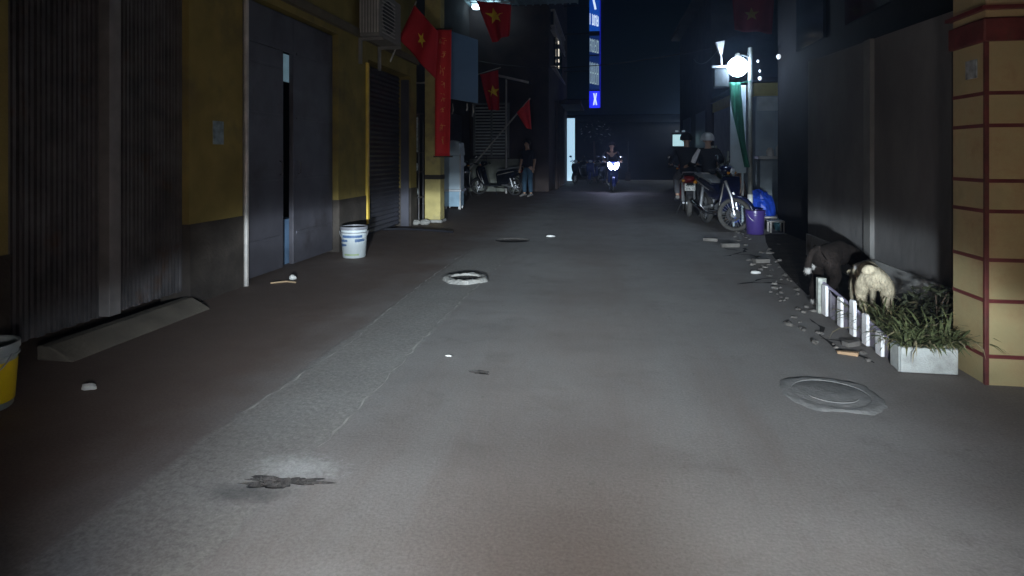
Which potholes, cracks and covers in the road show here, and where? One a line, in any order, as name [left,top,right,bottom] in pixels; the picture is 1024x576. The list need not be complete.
manhole cover [779,377,888,416]
pothole [236,475,336,489]
